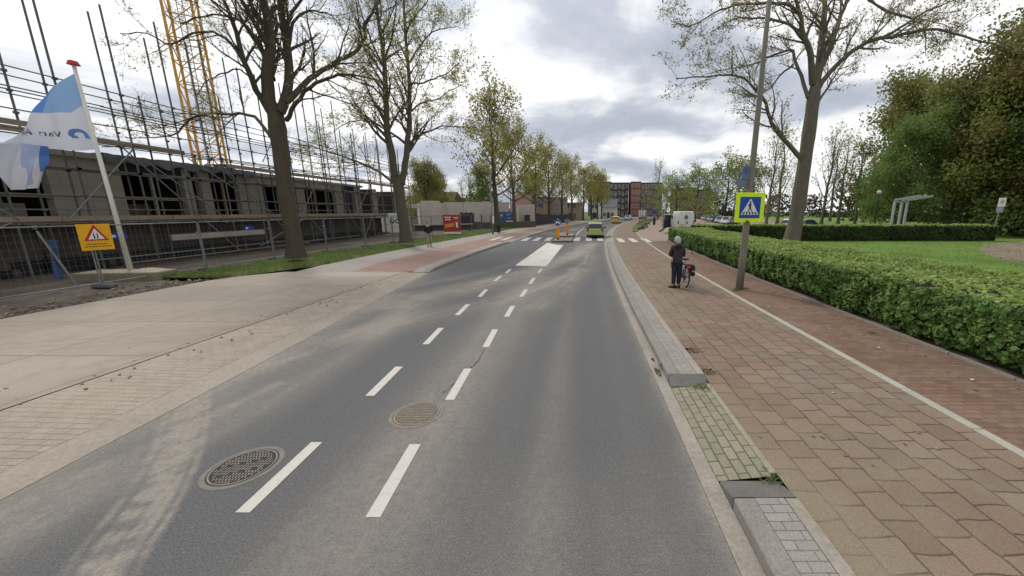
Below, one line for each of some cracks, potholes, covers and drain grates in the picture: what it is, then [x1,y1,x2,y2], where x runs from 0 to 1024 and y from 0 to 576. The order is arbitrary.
manhole cover [388,401,445,429]
manhole cover [197,446,285,491]
